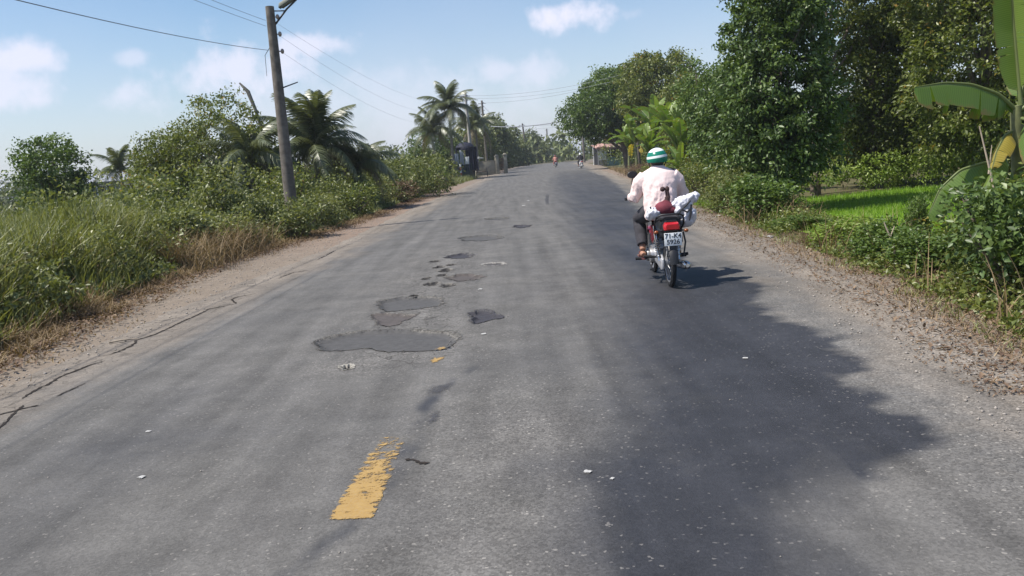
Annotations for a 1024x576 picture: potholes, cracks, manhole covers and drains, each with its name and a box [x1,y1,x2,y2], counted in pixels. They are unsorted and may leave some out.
crack [0,294,251,427]
